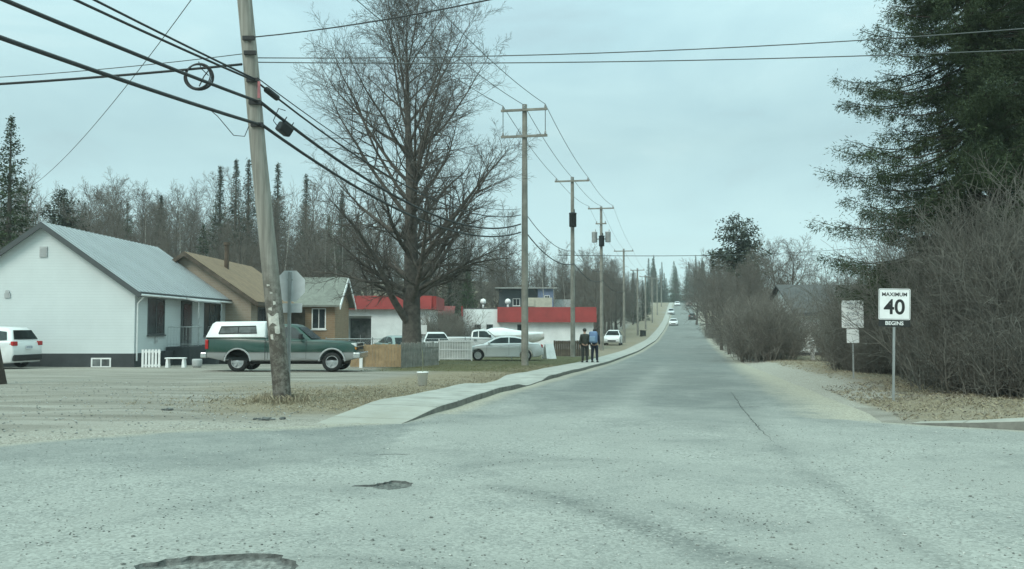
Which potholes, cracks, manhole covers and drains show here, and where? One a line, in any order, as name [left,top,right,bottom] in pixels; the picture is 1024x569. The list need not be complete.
crack [732,393,774,442]
pothole [354,480,413,490]
pothole [134,553,299,569]
